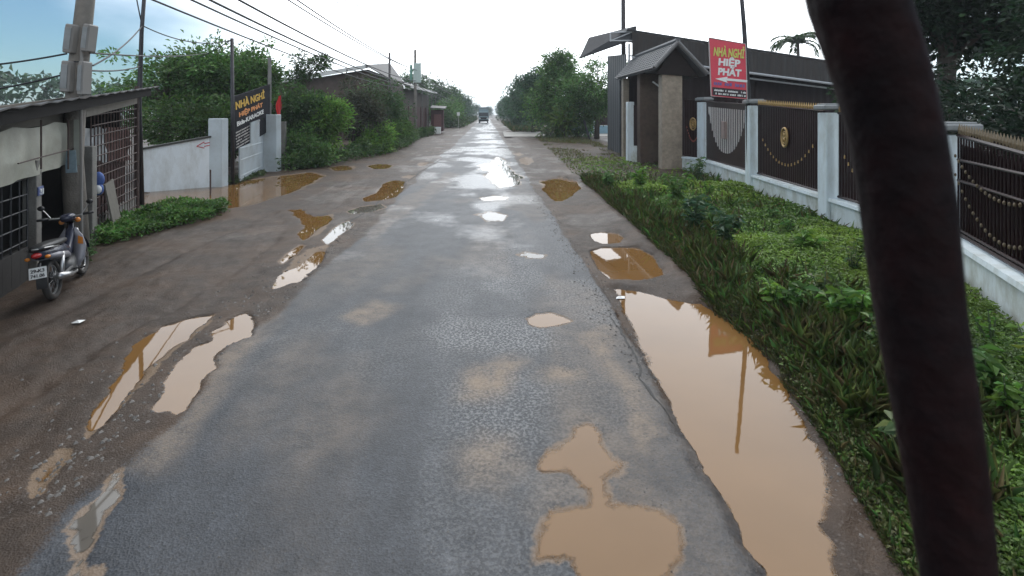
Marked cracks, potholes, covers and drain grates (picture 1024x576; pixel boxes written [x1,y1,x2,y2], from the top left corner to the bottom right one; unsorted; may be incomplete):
pothole [534,175,588,203]
pothole [516,308,586,332]
pothole [283,207,339,243]
pothole [584,242,673,283]
pothole [481,403,730,576]
pothole [585,230,629,245]
pothole [263,242,336,291]
pothole [59,310,226,454]
pothole [357,179,410,203]
pothole [132,307,268,422]
